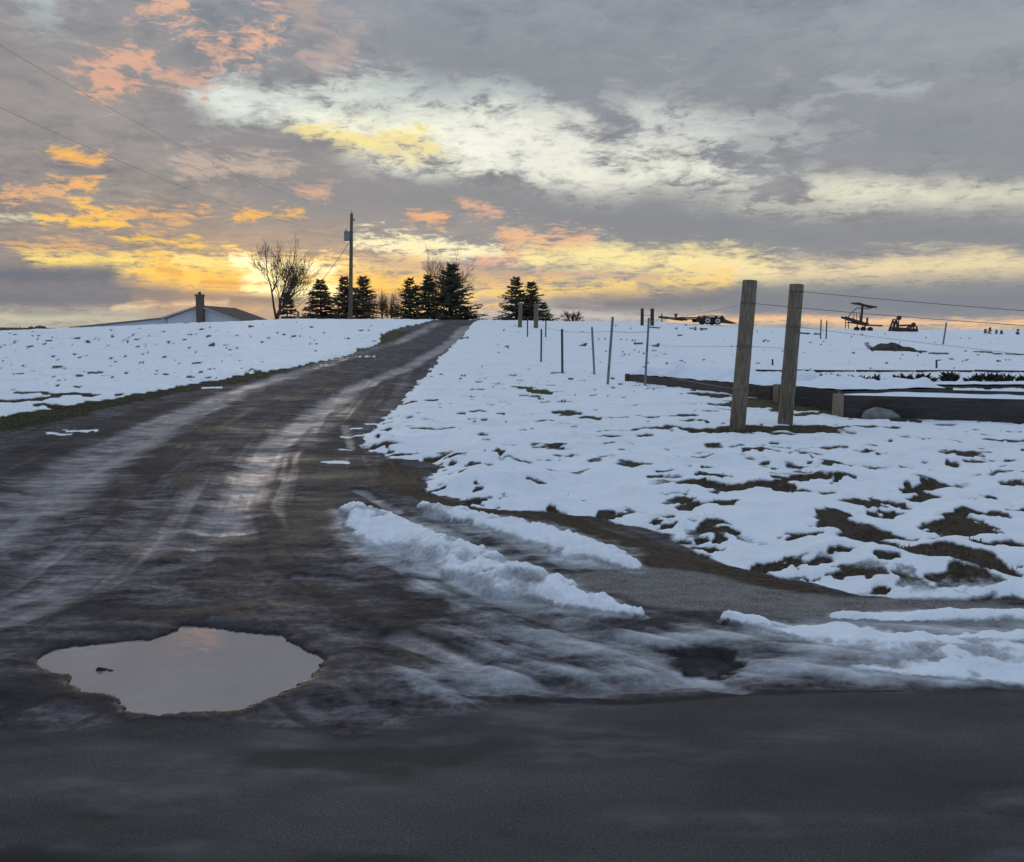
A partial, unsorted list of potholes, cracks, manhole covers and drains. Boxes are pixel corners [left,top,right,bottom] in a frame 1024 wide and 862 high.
pothole [26,621,330,718]
pothole [653,644,754,681]
